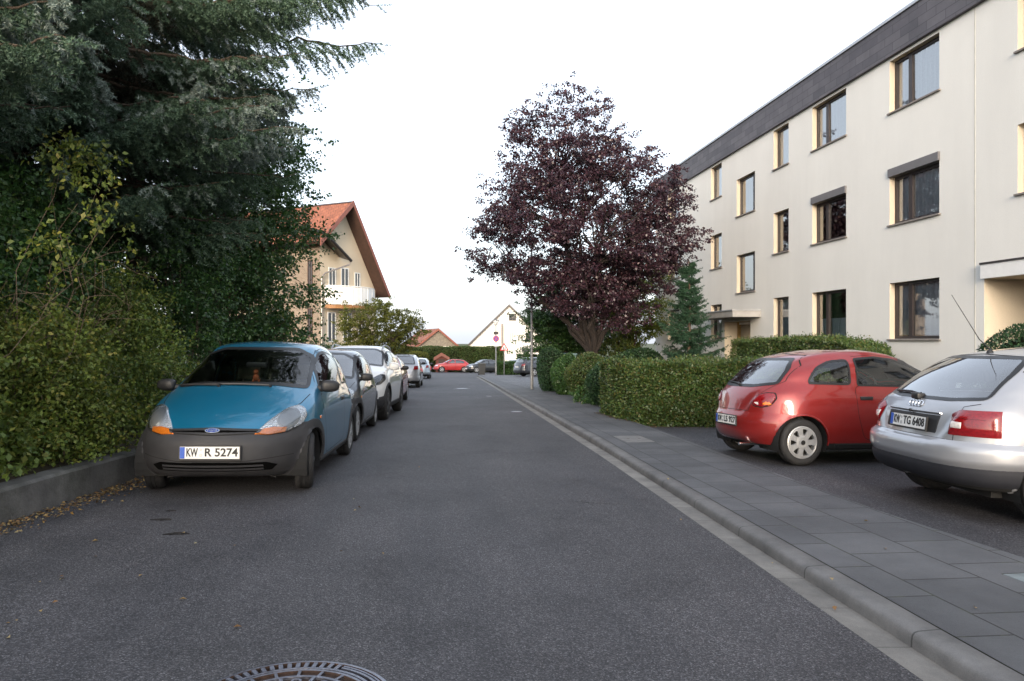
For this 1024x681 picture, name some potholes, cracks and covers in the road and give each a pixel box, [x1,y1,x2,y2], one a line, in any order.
manhole cover [217,661,386,681]
